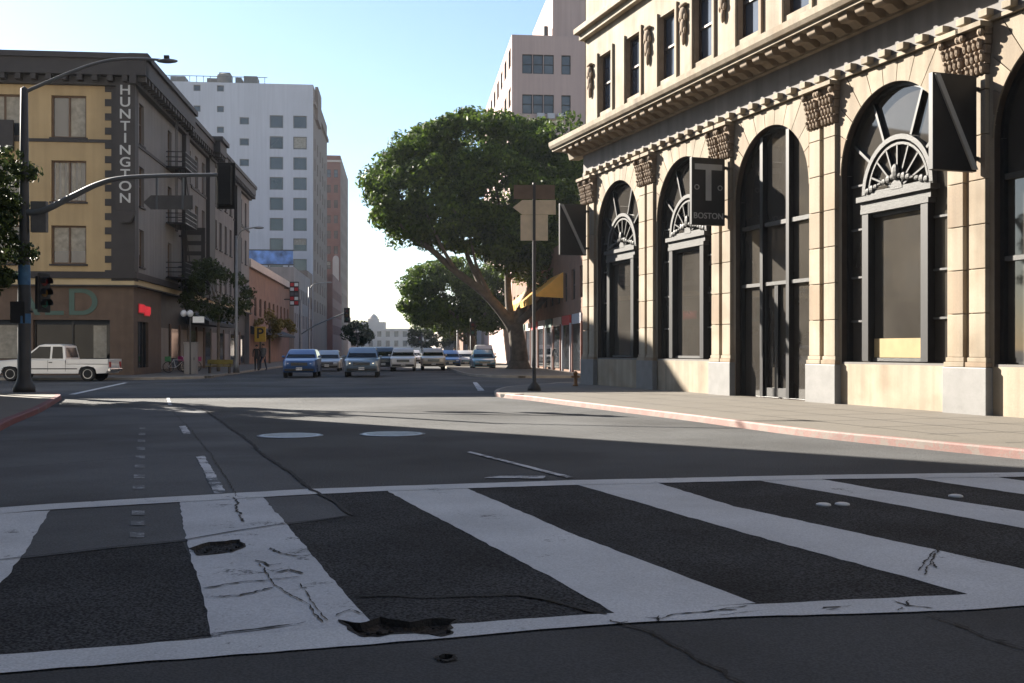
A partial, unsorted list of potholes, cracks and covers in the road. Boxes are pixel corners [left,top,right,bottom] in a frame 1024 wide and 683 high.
crack [896,600,1024,648]
pothole [189,539,246,555]
pothole [338,617,458,637]
crack [918,529,963,575]
